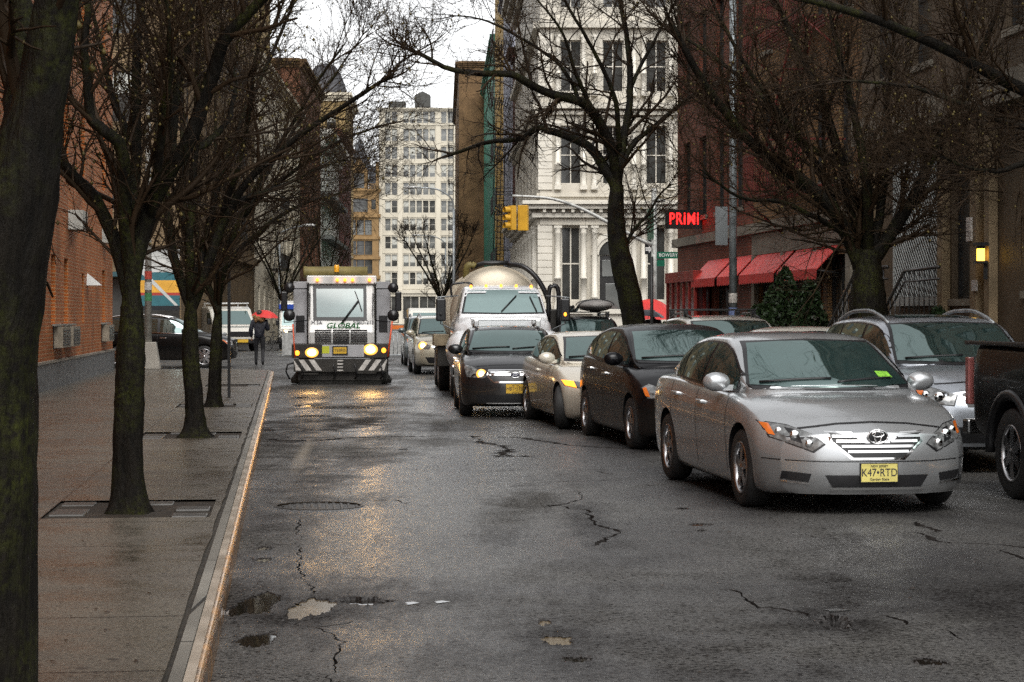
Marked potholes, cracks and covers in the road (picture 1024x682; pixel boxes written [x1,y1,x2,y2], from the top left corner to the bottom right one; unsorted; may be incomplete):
crack [542,471,621,546]
crack [913,522,1024,559]
pothole [225,591,288,617]
pothole [812,611,854,630]
crack [722,589,809,616]
pothole [228,631,281,648]
manhole cover [274,501,364,510]
pothole [909,655,955,666]
